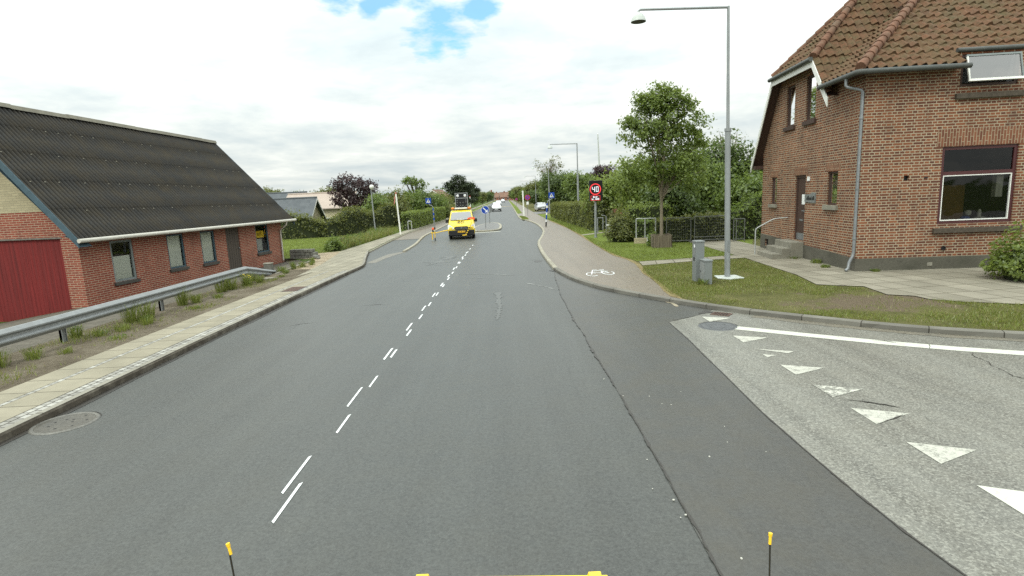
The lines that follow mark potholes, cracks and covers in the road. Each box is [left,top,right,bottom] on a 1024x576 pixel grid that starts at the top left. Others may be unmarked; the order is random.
manhole cover [698,322,738,331]
manhole cover [28,412,101,435]
